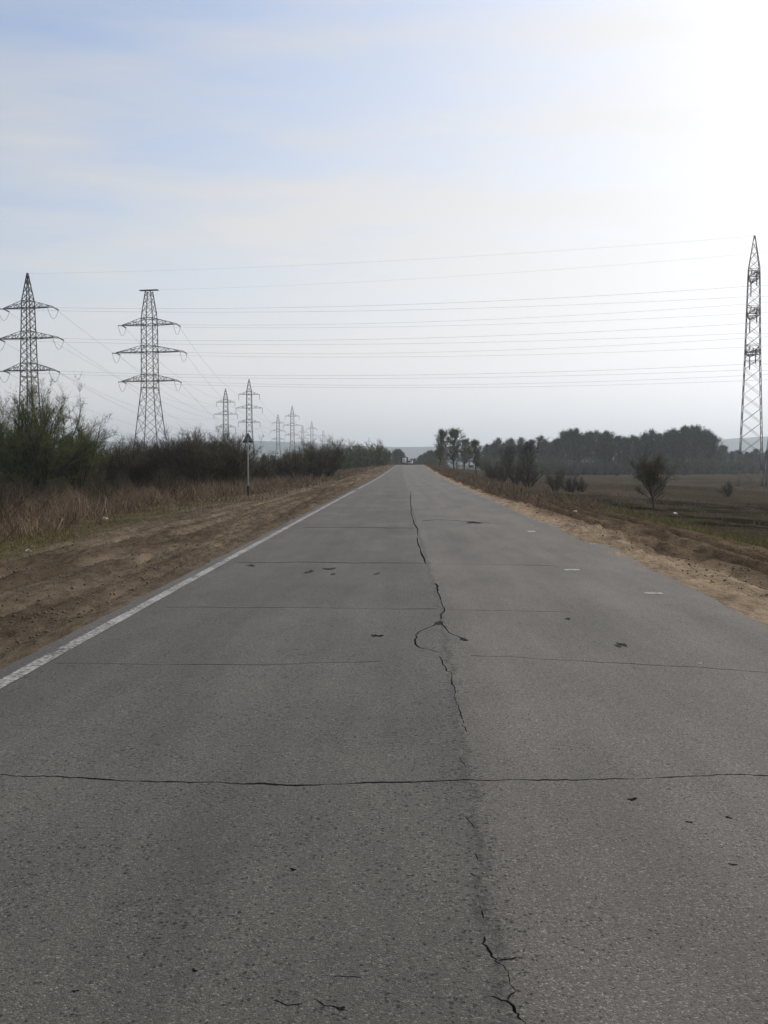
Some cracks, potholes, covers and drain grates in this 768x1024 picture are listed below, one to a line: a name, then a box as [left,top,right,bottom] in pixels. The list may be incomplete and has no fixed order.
crack [481,936,526,1024]
crack [273,999,348,1011]
crack [0,757,768,786]
crack [410,492,498,564]
